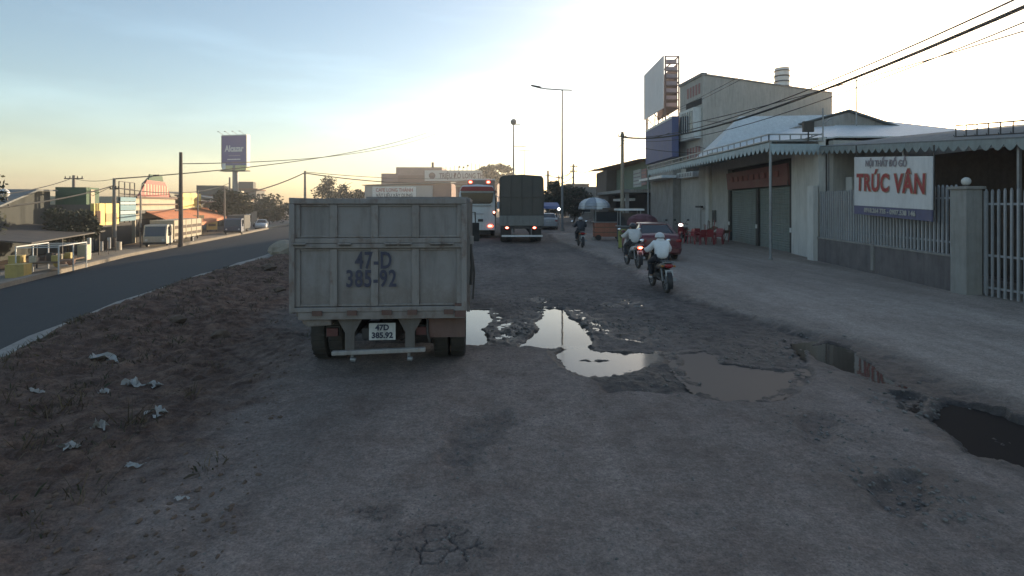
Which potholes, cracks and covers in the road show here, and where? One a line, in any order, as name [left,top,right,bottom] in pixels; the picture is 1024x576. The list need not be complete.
pothole [884,388,931,414]
pothole [790,340,908,388]
pothole [661,349,811,402]
pothole [847,467,943,522]
pothole [517,307,599,349]
pothole [485,320,526,344]
pothole [907,396,1024,468]
pothole [603,333,657,342]
pothole [551,344,677,377]
crack [353,505,494,576]
